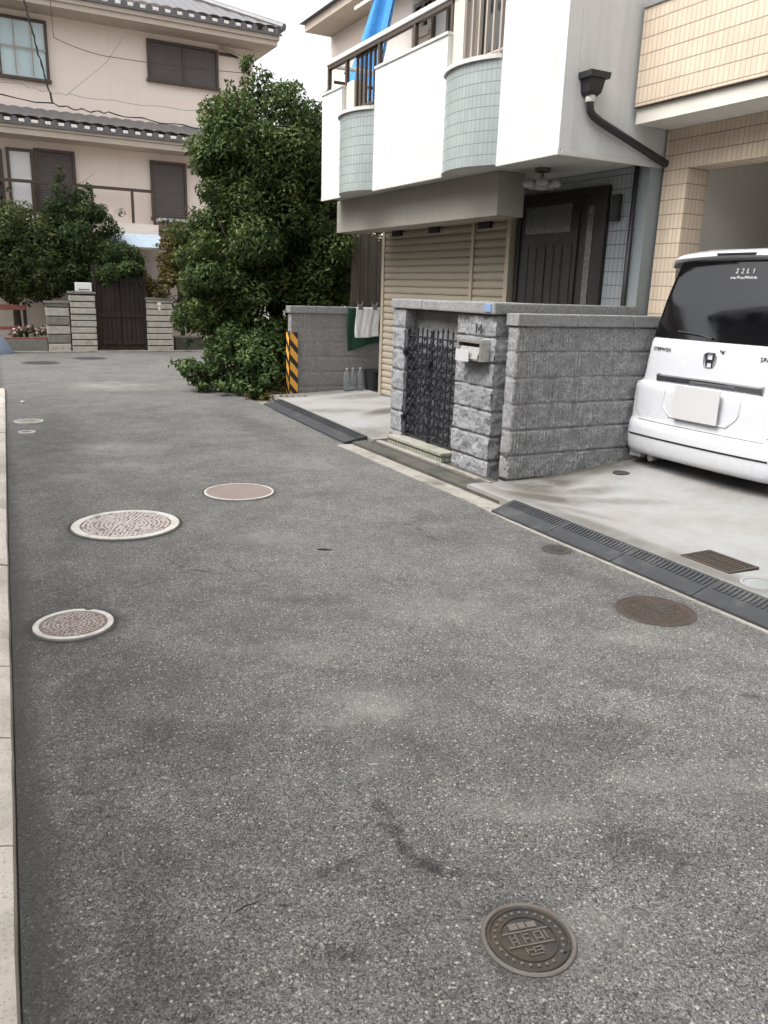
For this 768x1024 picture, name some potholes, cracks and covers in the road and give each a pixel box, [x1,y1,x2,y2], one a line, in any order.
utility cover [542,545,571,554]
manhole cover [67,510,183,542]
manhole cover [615,596,697,627]
utility cover [481,903,577,979]
drain grate [680,550,759,574]
manhole cover [202,483,276,501]
manhole cover [28,609,118,643]
